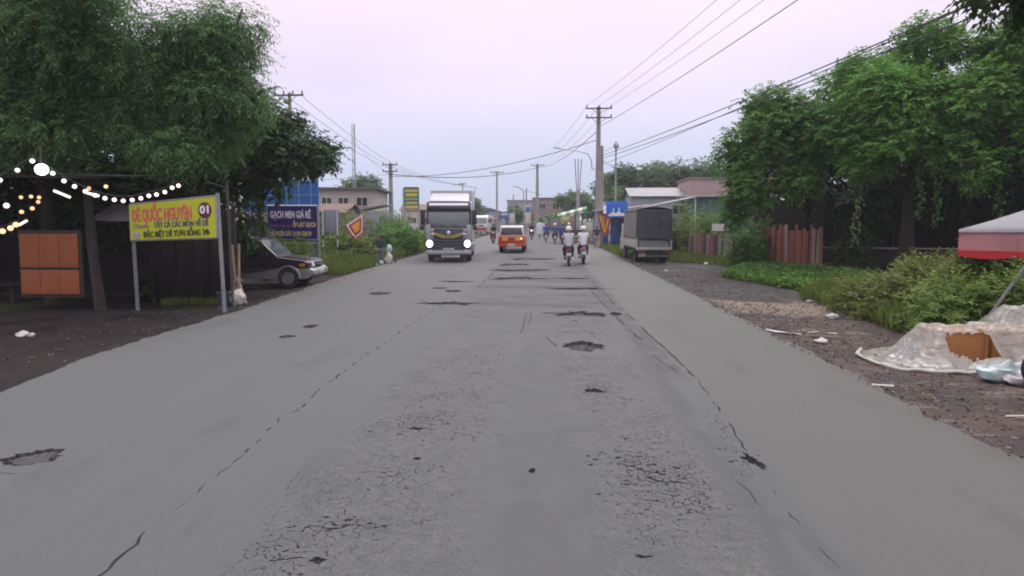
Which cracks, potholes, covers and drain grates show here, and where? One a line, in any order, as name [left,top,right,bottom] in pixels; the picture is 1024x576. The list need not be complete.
pothole [740,452,767,470]
pothole [0,448,65,466]
crack [702,411,761,507]
crack [355,269,697,447]
crack [98,299,454,576]
pothole [562,341,604,352]
crack [587,418,736,550]
